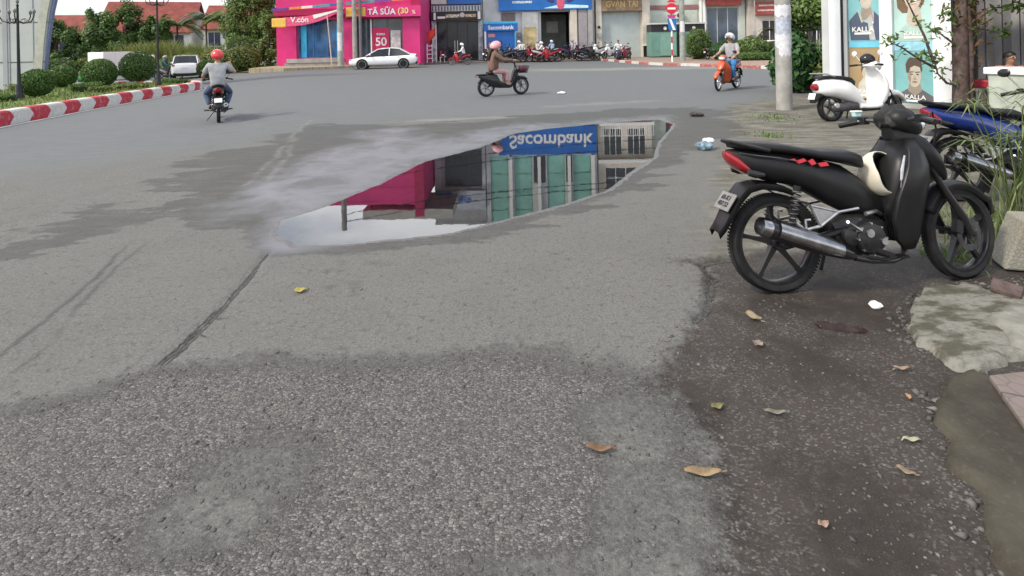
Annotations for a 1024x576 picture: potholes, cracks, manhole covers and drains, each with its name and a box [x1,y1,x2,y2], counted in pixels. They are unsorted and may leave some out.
pothole [268,119,675,248]
crack [154,253,268,367]
